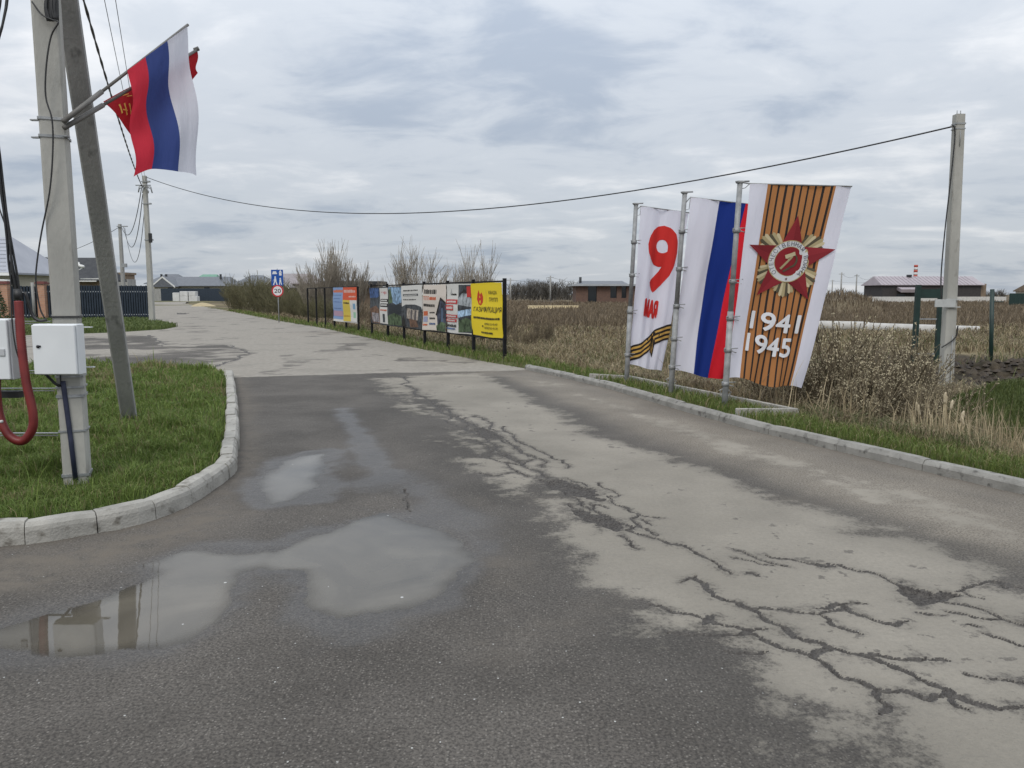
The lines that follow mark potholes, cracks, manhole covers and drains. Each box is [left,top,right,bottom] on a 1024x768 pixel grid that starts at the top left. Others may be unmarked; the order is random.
crack [392,375,1024,715]
